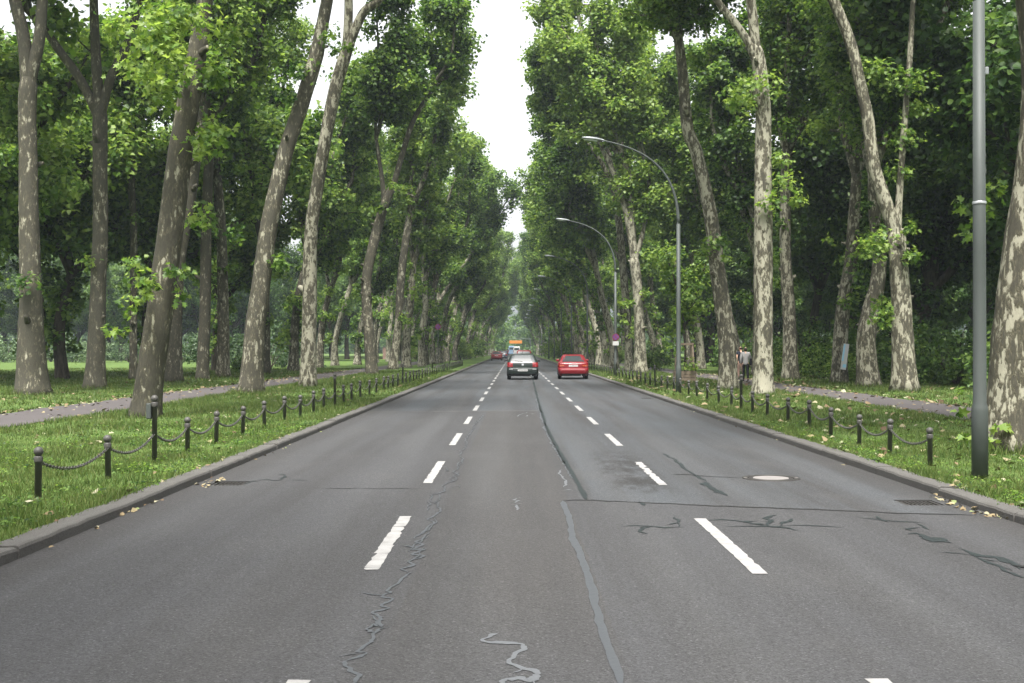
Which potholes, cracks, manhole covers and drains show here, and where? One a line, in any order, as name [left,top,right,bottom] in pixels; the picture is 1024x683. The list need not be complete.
crack [860,516,948,543]
